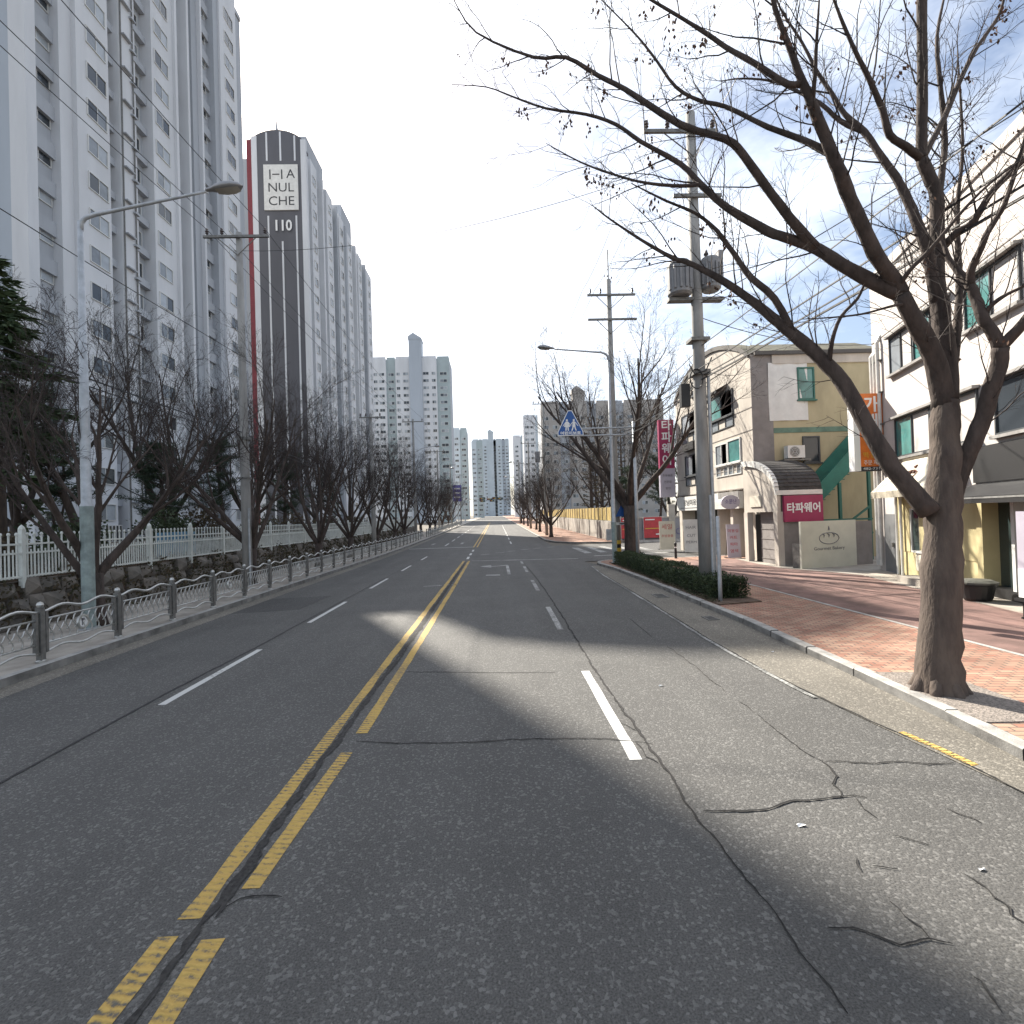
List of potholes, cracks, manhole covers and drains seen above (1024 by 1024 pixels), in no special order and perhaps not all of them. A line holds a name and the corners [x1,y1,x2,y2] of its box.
crack [974,977,1002,1012]
crack [965,874,1024,922]
crack [360,568,953,1014]
crack [226,895,282,907]
